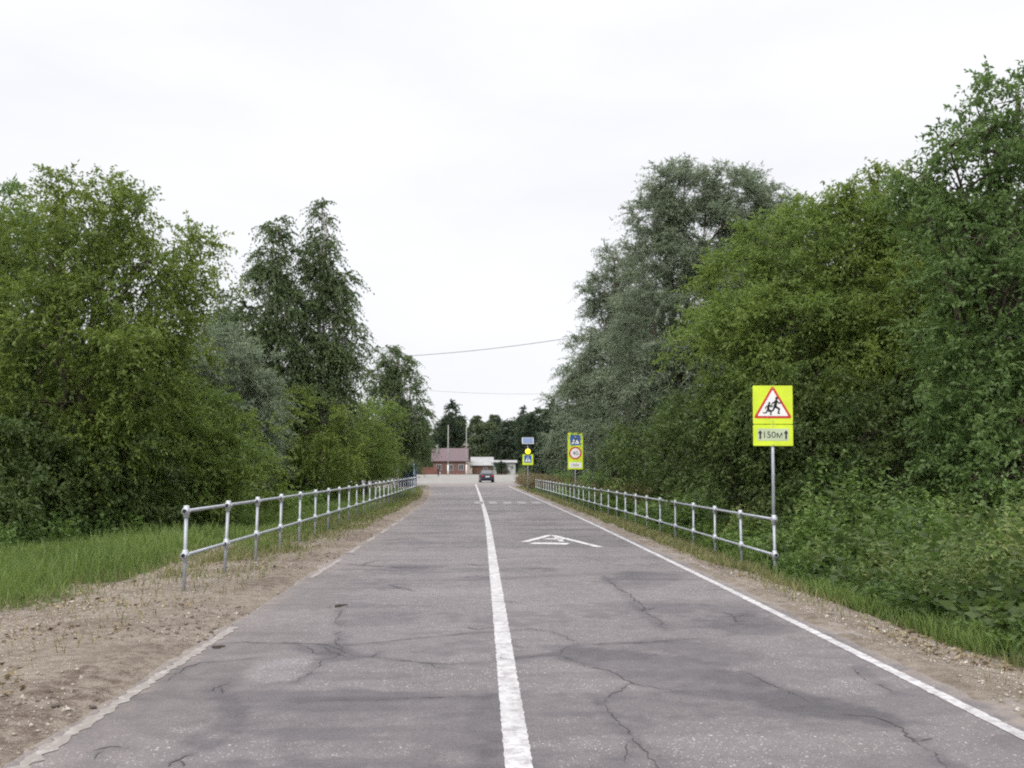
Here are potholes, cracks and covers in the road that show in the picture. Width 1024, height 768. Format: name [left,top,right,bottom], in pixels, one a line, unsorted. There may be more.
crack [500,629,694,768]
crack [168,611,490,681]
crack [749,673,947,766]
